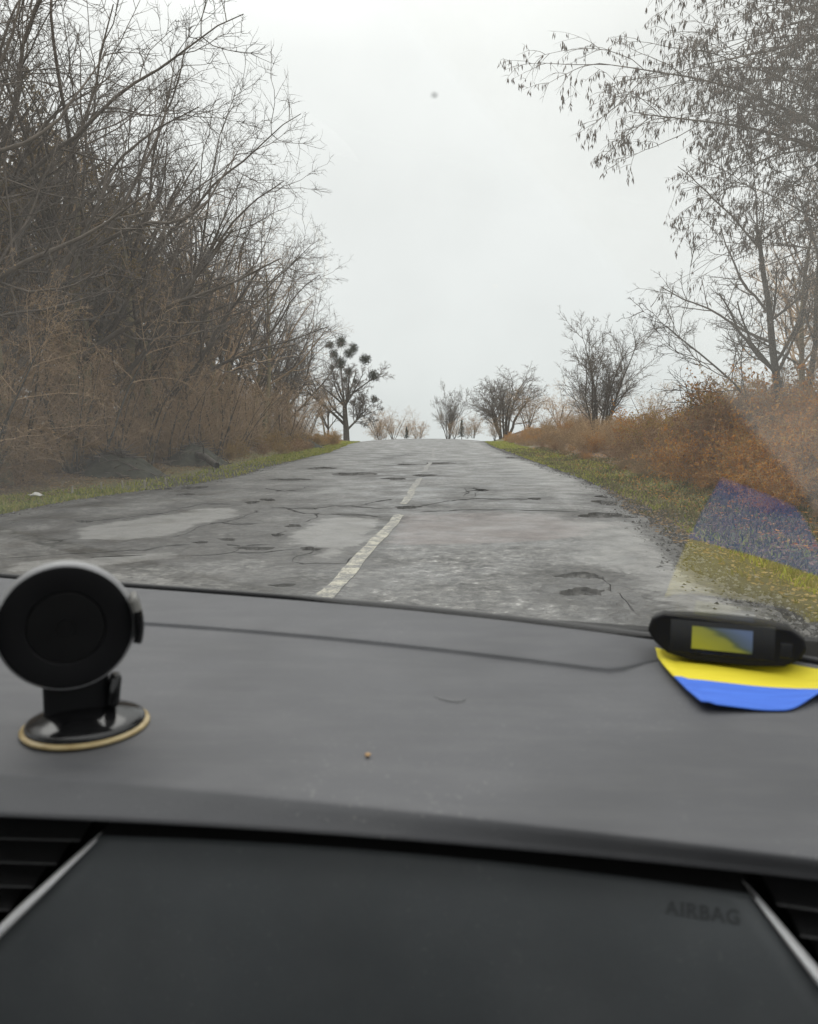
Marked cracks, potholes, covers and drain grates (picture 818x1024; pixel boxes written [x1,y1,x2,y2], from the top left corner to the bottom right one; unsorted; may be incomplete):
crack [602,577,639,616]
crack [1,486,392,564]
pothole [559,587,605,596]
crack [421,487,528,506]
pothole [552,571,605,579]
